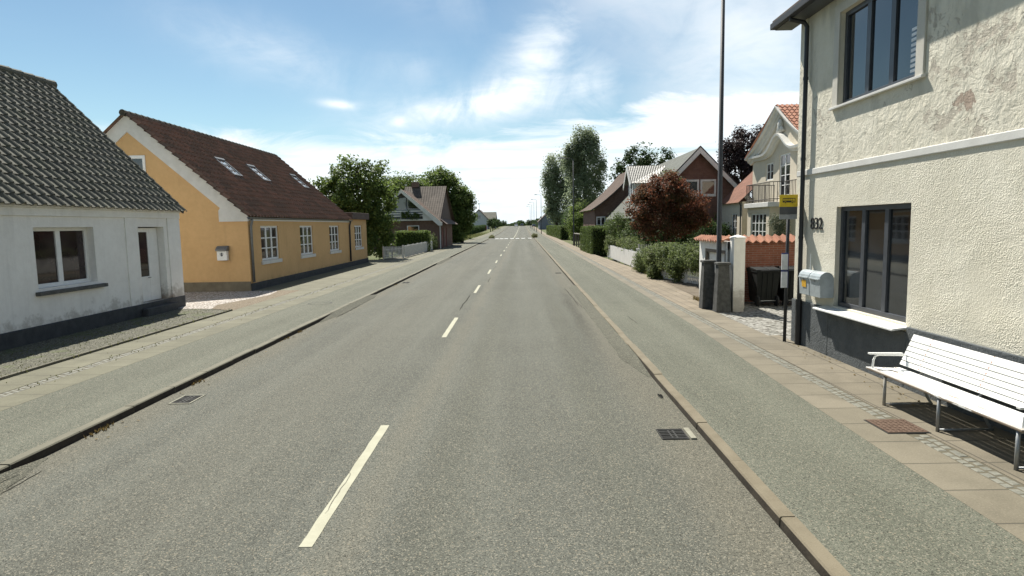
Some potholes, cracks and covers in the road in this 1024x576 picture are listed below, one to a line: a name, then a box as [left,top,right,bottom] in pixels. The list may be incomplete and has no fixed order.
crack [0,471,41,495]
drain grate [656,429,690,440]
drain grate [168,395,206,404]
manhole cover [864,419,931,434]
